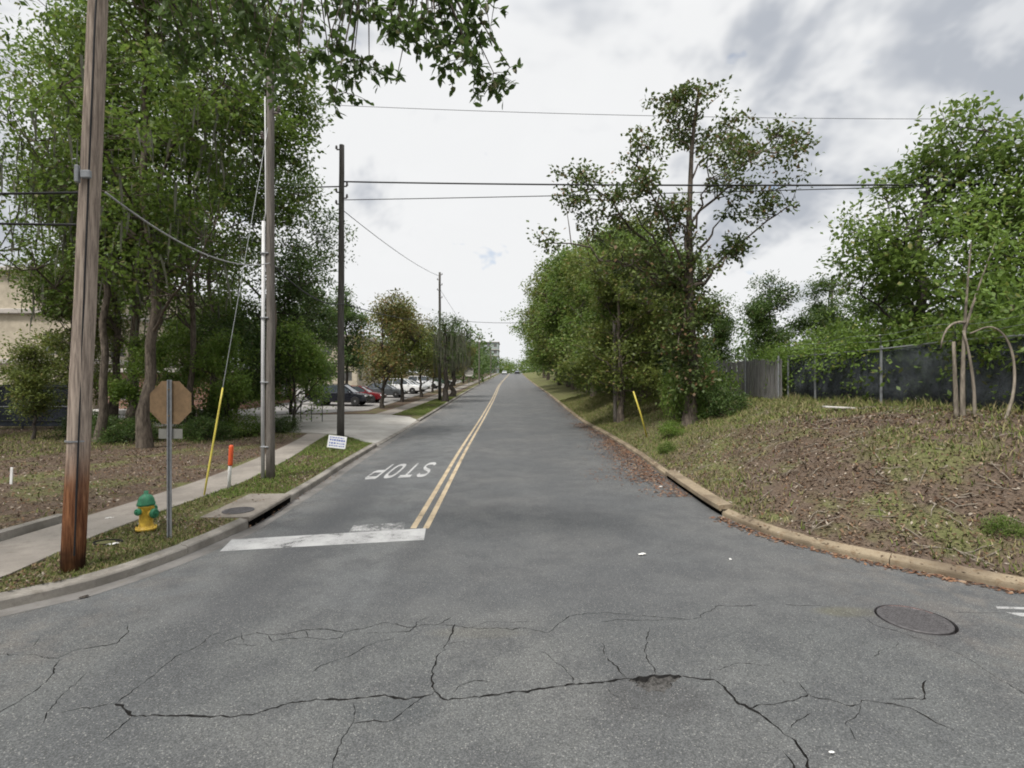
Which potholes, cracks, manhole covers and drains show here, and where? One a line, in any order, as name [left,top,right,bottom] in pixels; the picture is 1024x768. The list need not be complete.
drain grate [200,493,291,527]
pothole [629,674,681,697]
crack [222,605,756,671]
manhole cover [873,605,960,636]
crack [786,604,1024,694]
crack [0,624,951,768]
